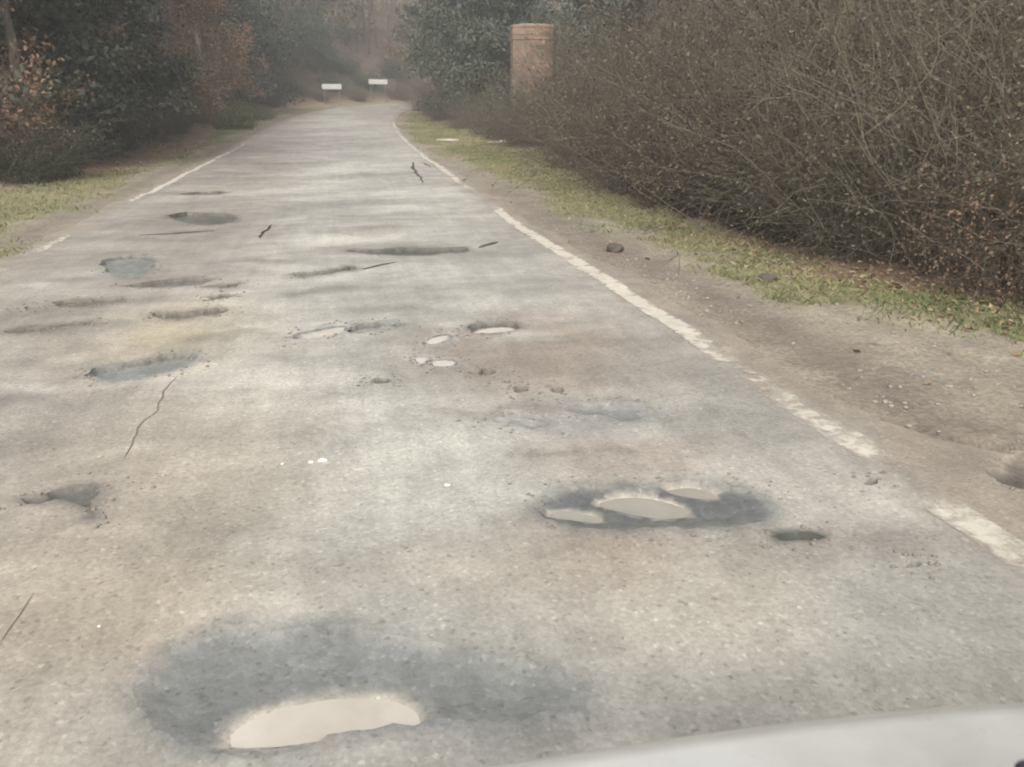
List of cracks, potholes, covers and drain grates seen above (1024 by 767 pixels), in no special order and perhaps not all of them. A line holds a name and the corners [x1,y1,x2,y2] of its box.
pothole [292,266,356,277]
pothole [169,212,238,225]
pothole [468,321,520,333]
pothole [3,321,93,333]
pothole [426,358,458,367]
pothole [122,277,213,288]
pothole [534,480,773,531]
pothole [349,247,469,256]
crack [124,376,178,459]
pothole [292,325,352,339]
pothole [132,623,588,759]
pothole [21,485,100,519]
